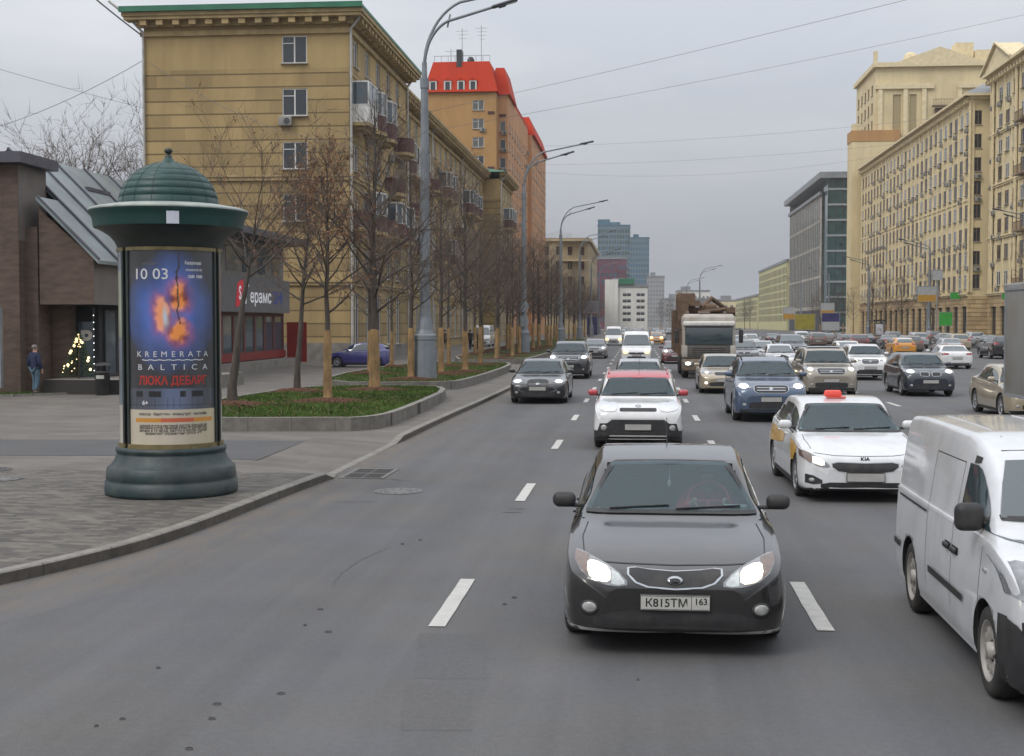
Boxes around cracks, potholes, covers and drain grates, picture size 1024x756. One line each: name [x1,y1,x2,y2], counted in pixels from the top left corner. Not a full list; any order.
drain grate [339,468,399,479]
